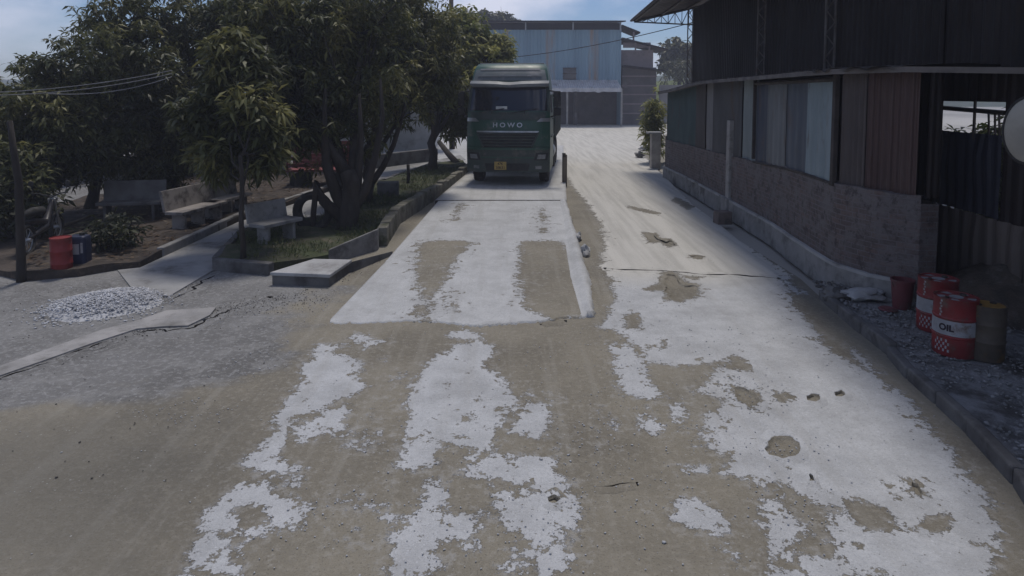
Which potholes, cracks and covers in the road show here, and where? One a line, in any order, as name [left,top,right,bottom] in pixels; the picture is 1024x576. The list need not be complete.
crack [592,476,638,495]
pothole [759,429,809,465]
pothole [641,230,681,249]
